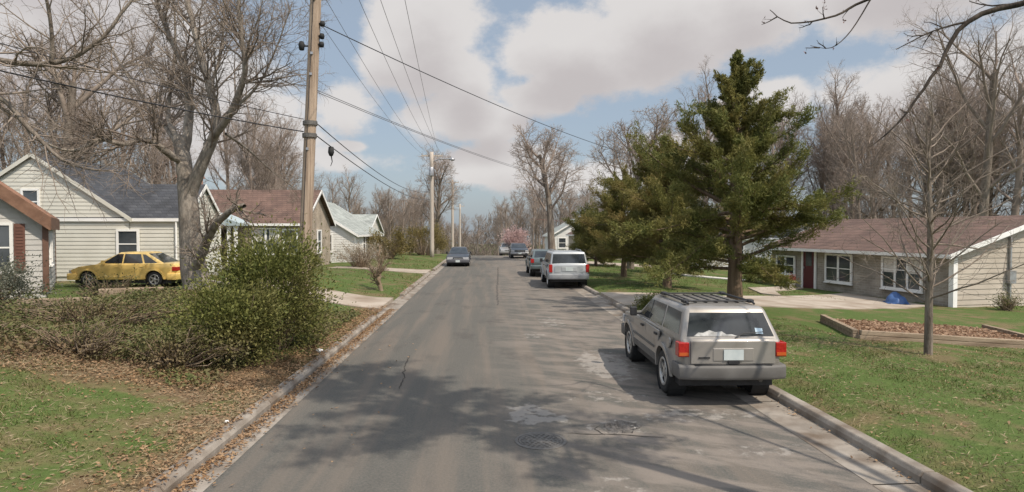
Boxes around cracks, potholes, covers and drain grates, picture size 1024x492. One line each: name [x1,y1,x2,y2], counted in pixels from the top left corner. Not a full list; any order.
manhole cover [515,432,567,450]
